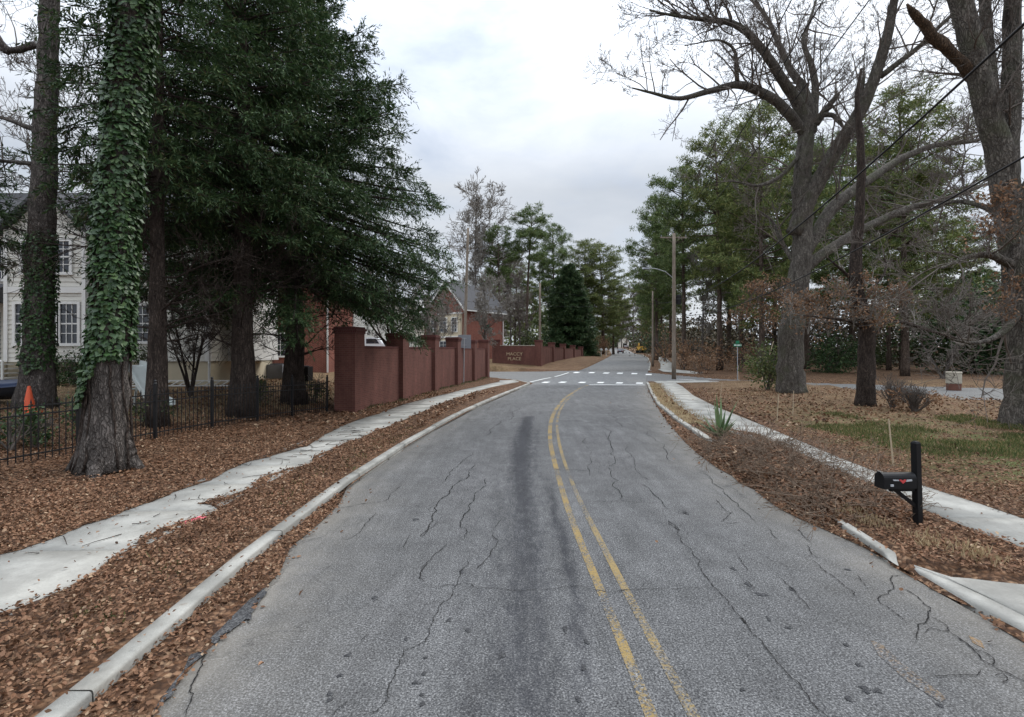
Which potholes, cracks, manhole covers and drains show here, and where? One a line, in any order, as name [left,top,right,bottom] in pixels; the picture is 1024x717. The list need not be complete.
crack [185,653,207,715]
crack [557,403,828,717]
crack [361,410,687,715]
crack [799,530,1024,682]
